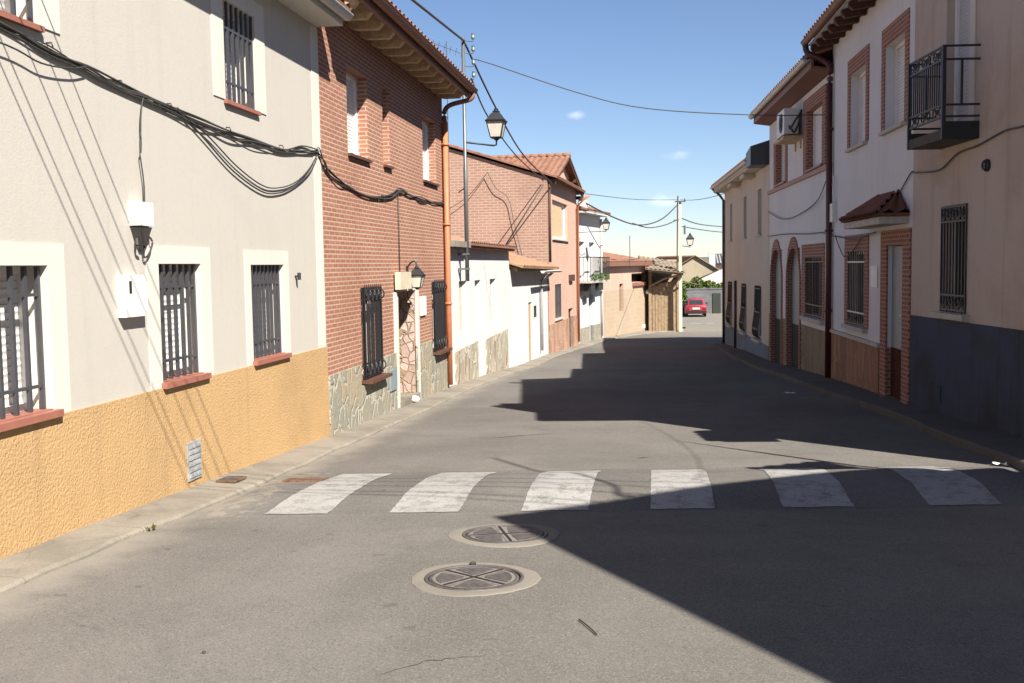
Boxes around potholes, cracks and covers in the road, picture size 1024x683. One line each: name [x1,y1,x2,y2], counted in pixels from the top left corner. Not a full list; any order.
manhole cover [448,524,560,548]
manhole cover [411,562,541,597]
